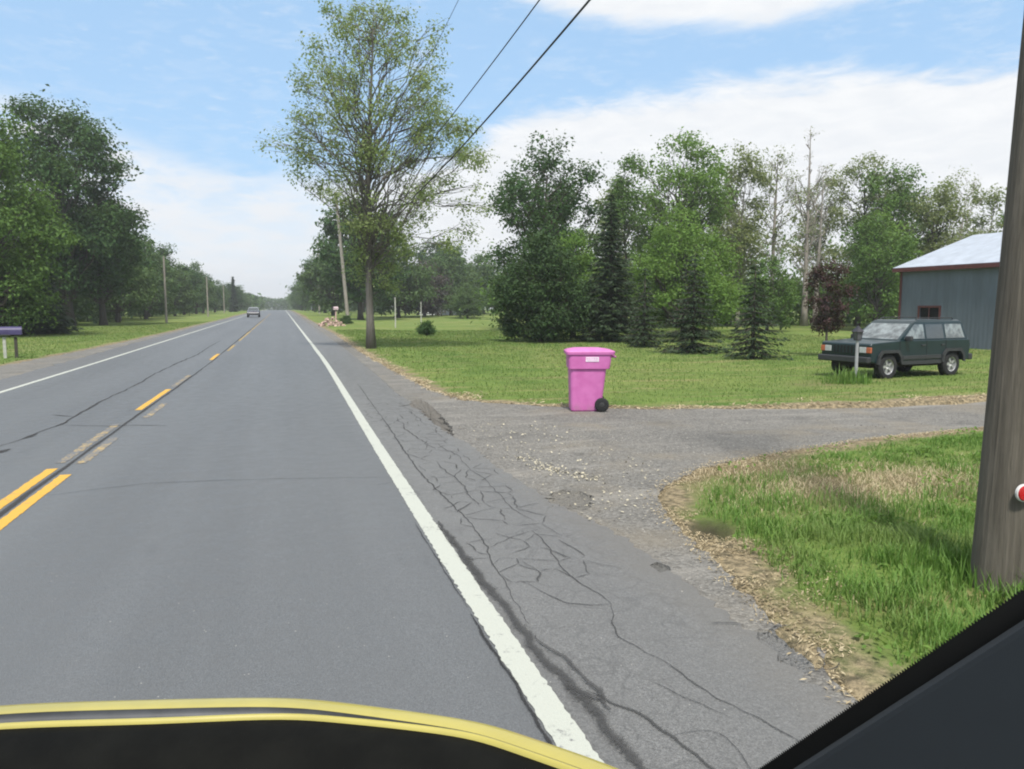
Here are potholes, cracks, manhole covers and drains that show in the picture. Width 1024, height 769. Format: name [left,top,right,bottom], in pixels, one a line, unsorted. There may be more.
pothole [409,399,454,436]
crack [363,391,799,769]
pothole [650,562,671,572]
crack [0,343,216,453]
pothole [545,490,594,511]
